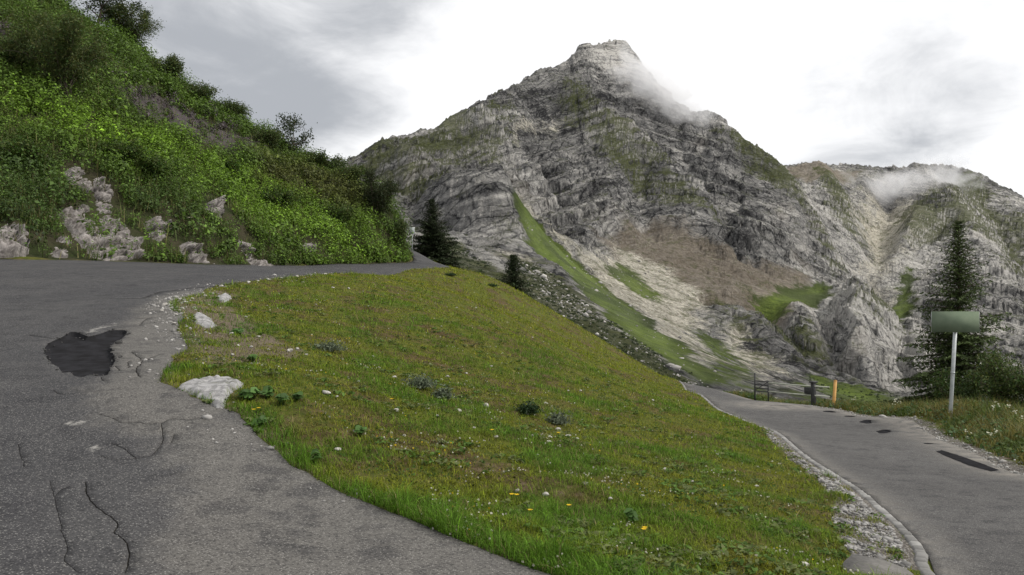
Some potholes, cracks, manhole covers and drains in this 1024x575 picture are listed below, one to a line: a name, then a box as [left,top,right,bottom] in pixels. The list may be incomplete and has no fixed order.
crack [99,414,179,460]
crack [50,482,70,566]
crack [85,482,131,572]
